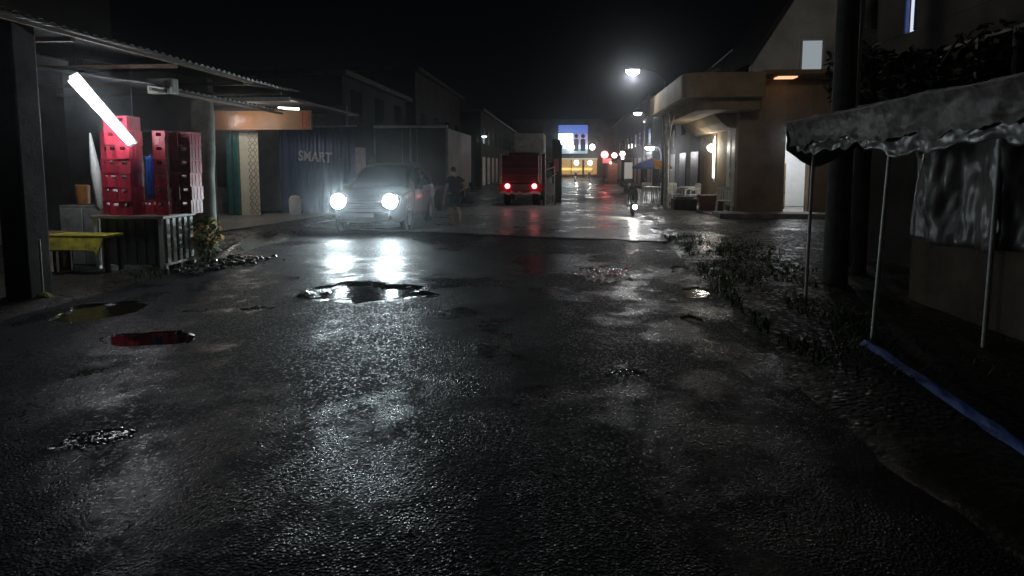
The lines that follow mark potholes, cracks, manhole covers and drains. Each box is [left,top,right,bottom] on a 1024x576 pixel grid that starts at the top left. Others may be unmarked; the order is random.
pothole [293,281,441,304]
pothole [99,330,196,347]
pothole [604,368,648,377]
pothole [681,287,713,298]
pothole [44,427,138,451]
pothole [574,265,634,283]
pothole [48,301,150,324]
pothole [679,314,706,323]
